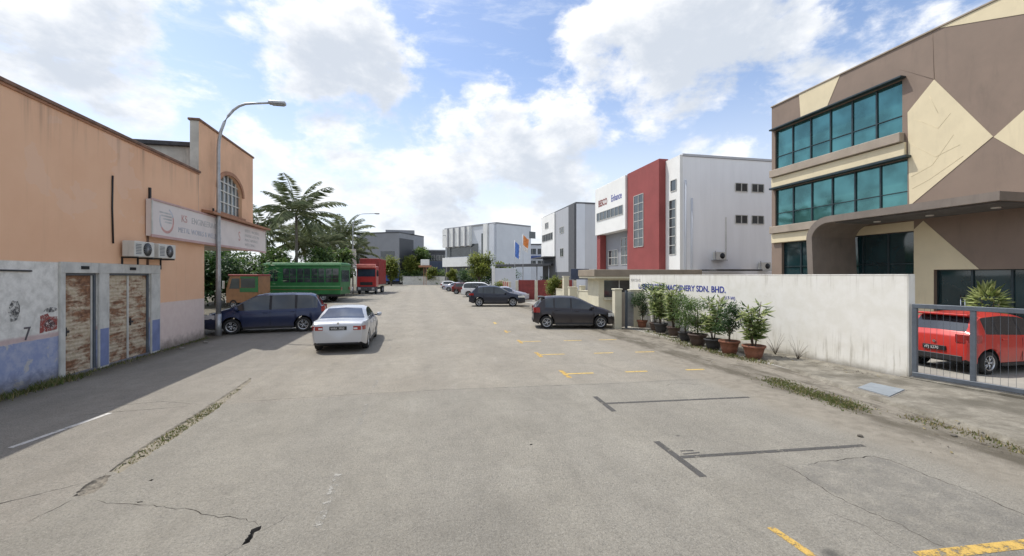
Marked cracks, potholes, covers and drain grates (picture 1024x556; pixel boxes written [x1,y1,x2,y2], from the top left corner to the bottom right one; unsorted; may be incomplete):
manhole cover [857,382,907,398]
pothole [74,475,111,496]
crack [814,456,1023,514]
crack [0,482,292,556]
crack [773,461,964,556]
